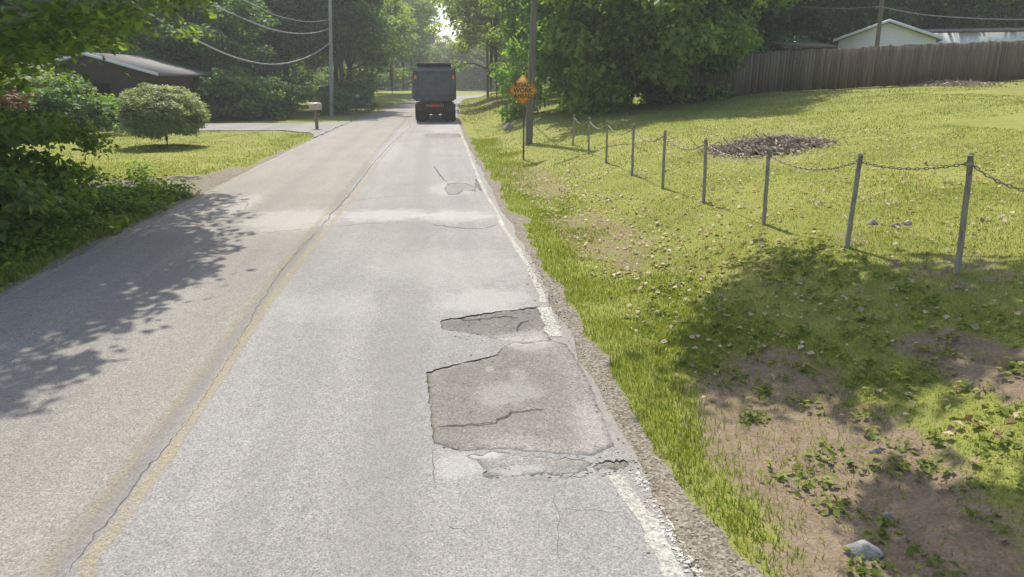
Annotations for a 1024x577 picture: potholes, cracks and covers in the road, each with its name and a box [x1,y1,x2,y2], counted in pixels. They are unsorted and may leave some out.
crack [553,495,614,561]
pothole [440,307,553,343]
pothole [466,451,591,478]
